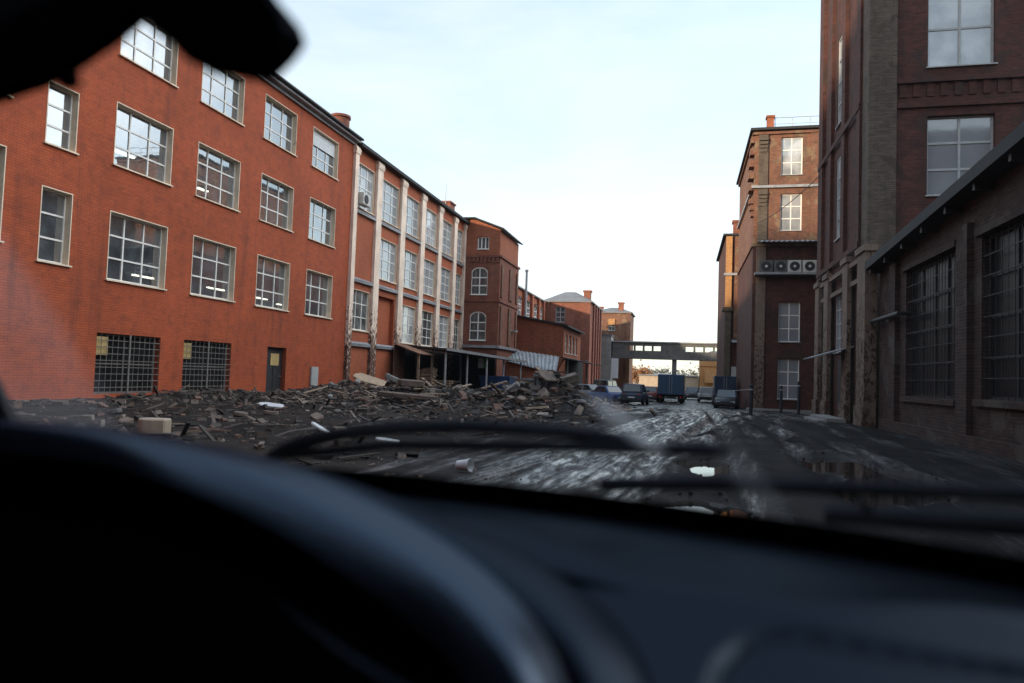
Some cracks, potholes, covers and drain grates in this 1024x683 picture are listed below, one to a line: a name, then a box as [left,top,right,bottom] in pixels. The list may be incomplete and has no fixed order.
pothole [640,491,756,515]
pothole [797,450,959,507]
pothole [671,456,734,476]
